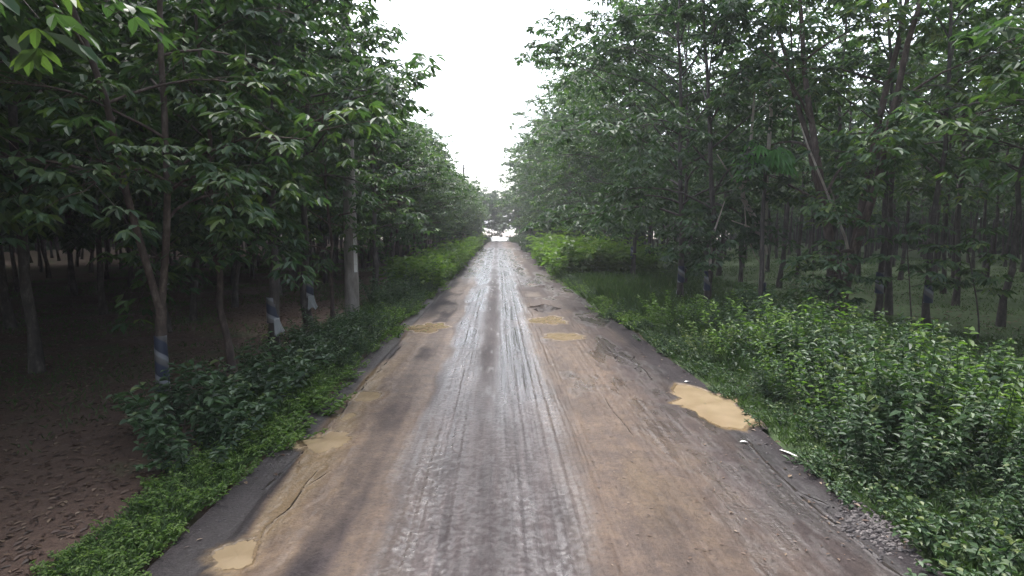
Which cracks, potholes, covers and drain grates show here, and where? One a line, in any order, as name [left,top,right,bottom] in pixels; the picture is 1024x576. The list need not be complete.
crack [610,352,652,379]
pothole [526,303,565,314]
